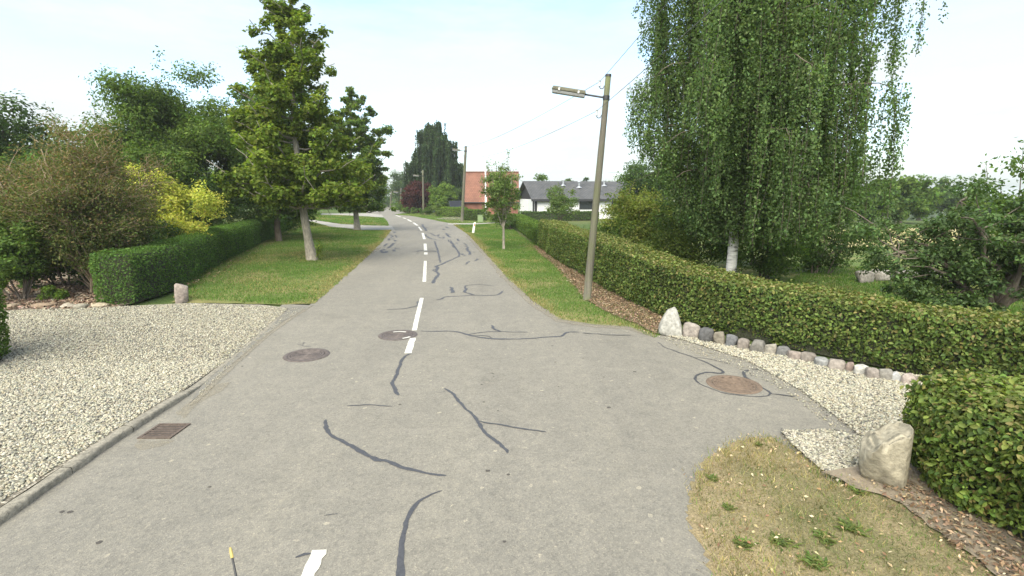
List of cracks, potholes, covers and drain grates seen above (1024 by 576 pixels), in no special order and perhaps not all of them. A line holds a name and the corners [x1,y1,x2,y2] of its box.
manhole cover [283,348,330,362]
manhole cover [706,375,763,394]
manhole cover [378,330,417,340]
drain grate [137,423,191,439]
